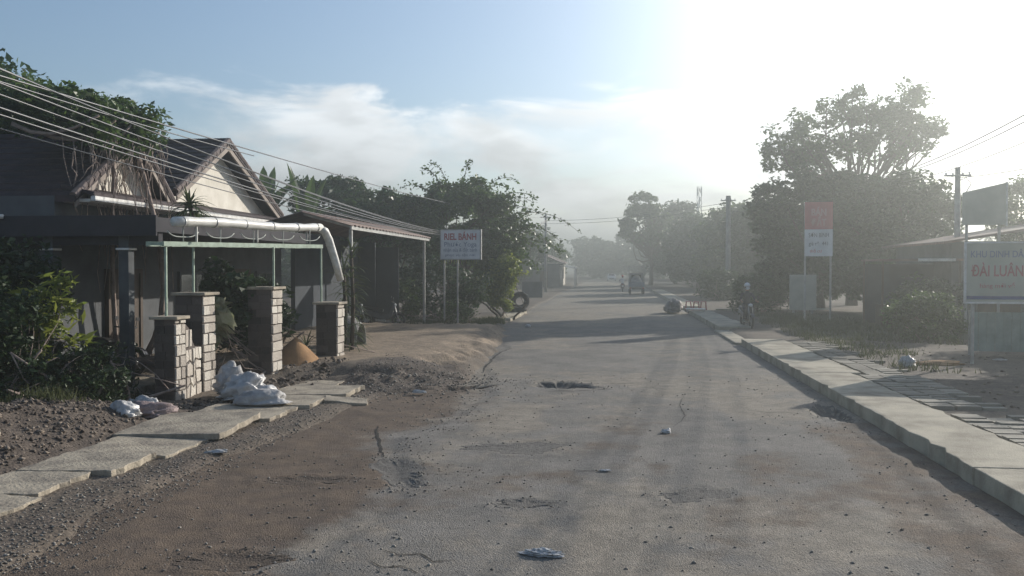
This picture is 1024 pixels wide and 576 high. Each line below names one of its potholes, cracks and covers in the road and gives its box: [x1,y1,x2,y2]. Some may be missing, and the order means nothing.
crack [375,426,384,457]
pothole [368,458,427,489]
crack [370,550,457,573]
